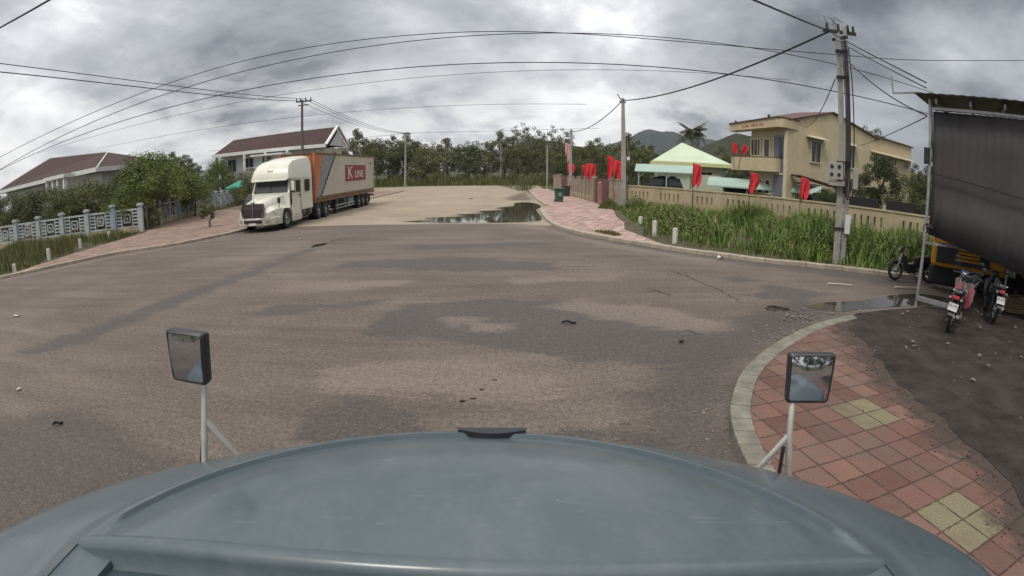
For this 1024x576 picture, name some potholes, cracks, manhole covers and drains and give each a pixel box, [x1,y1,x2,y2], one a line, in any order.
crack [644,268,765,303]
